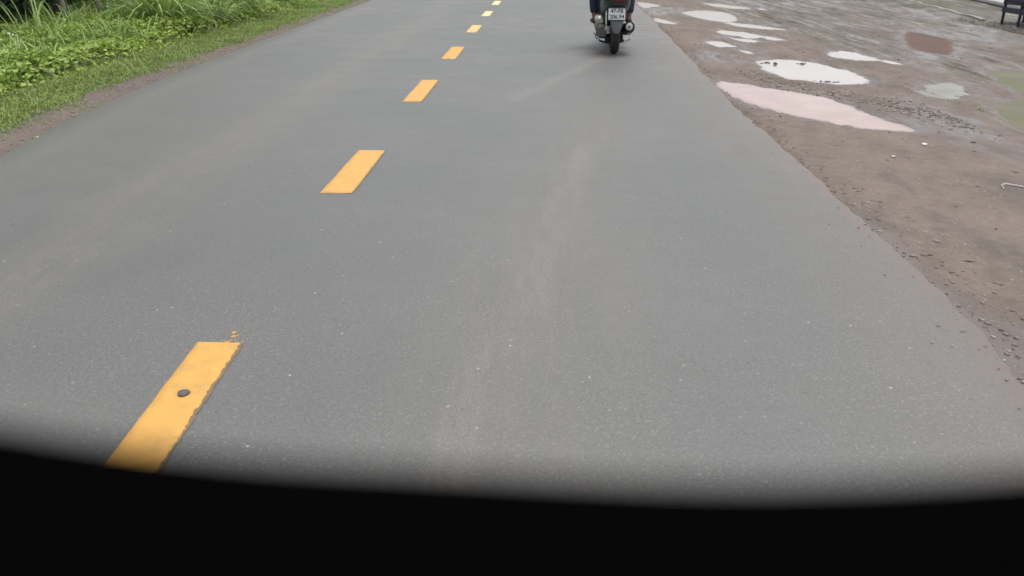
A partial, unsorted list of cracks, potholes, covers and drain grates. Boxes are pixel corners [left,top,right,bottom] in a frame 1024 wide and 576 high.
pothole [743,56,893,86]
pothole [903,78,1004,102]
pothole [672,9,799,31]
pothole [891,30,970,56]
pothole [816,48,917,66]
pothole [708,77,939,134]
